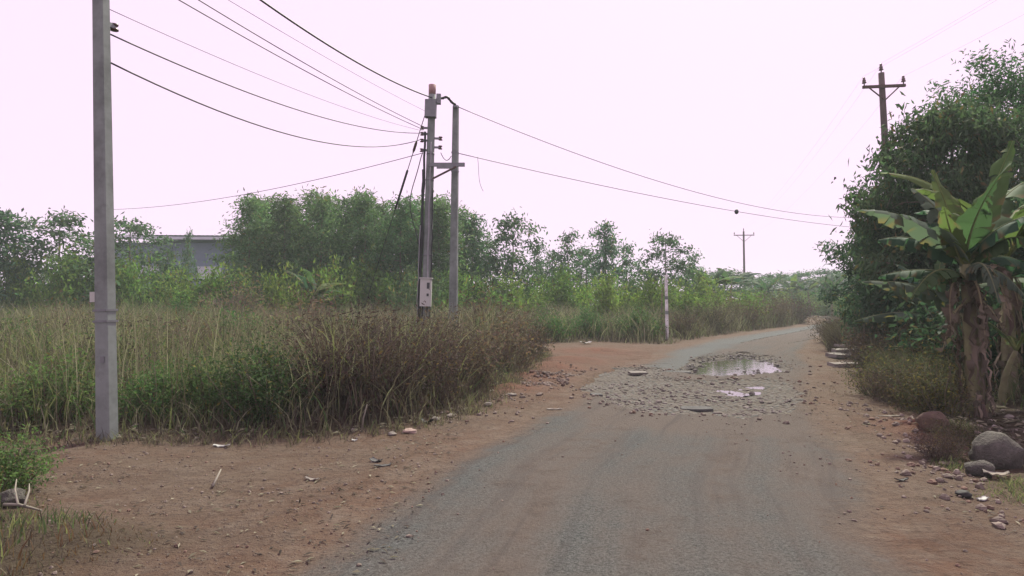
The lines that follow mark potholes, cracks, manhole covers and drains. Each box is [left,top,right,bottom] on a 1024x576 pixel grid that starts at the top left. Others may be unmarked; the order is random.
pothole [676,352,793,376]
pothole [573,367,805,419]
